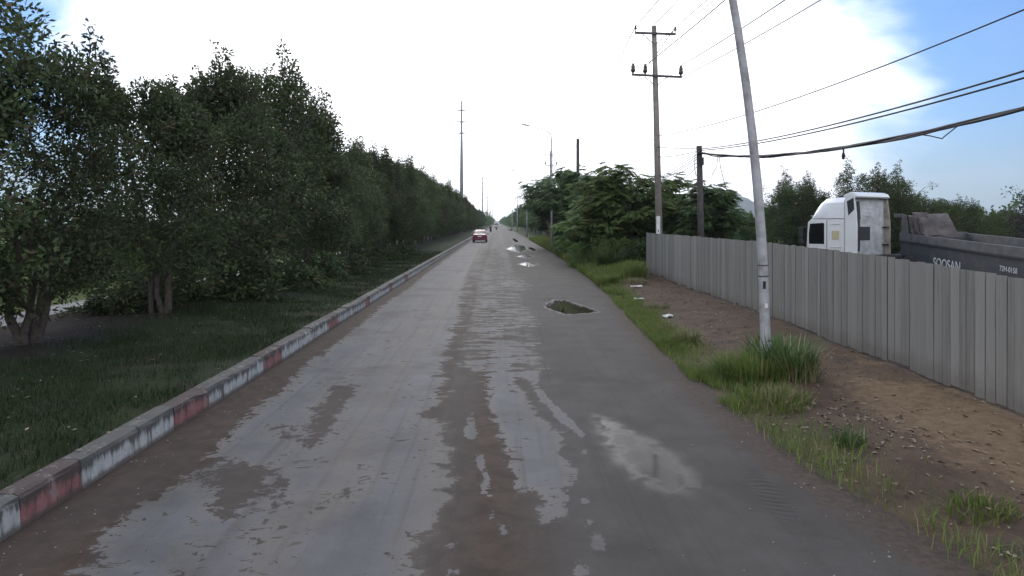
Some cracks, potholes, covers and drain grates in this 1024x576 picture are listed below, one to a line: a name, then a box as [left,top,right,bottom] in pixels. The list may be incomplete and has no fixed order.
pothole [505,245,528,253]
pothole [543,299,601,315]
